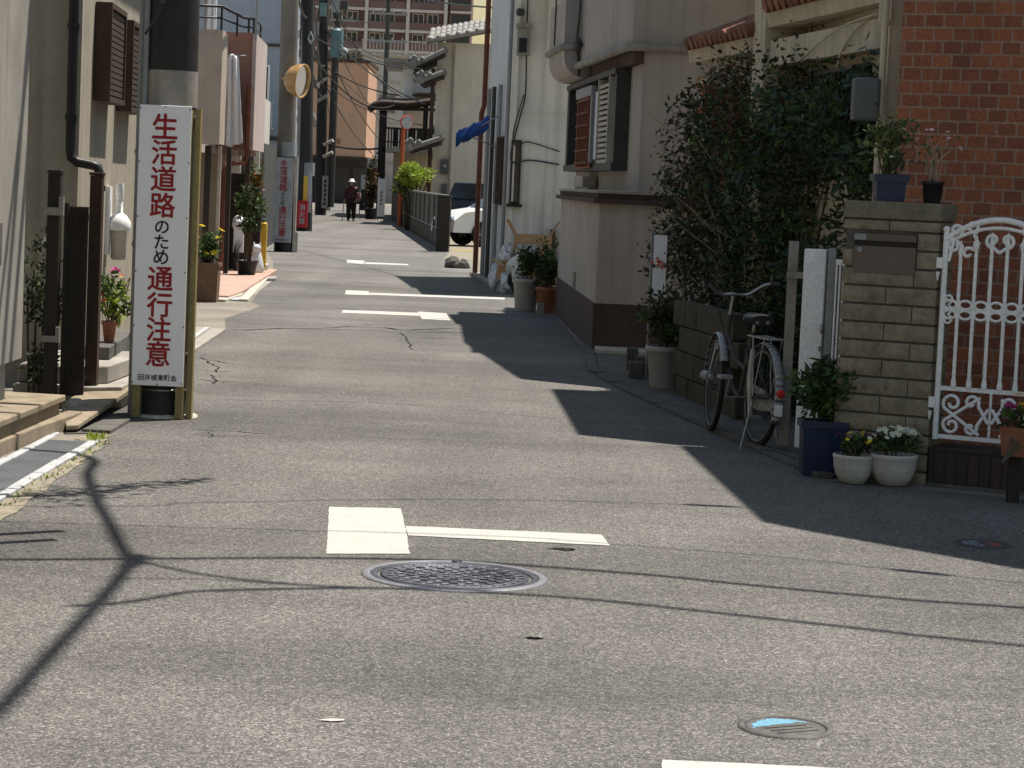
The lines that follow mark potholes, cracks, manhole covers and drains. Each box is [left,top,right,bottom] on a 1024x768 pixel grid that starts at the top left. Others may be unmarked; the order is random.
manhole cover [953,539,1011,549]
crack [226,307,466,350]
crack [198,357,237,384]
manhole cover [361,560,548,593]
manhole cover [737,715,834,740]
